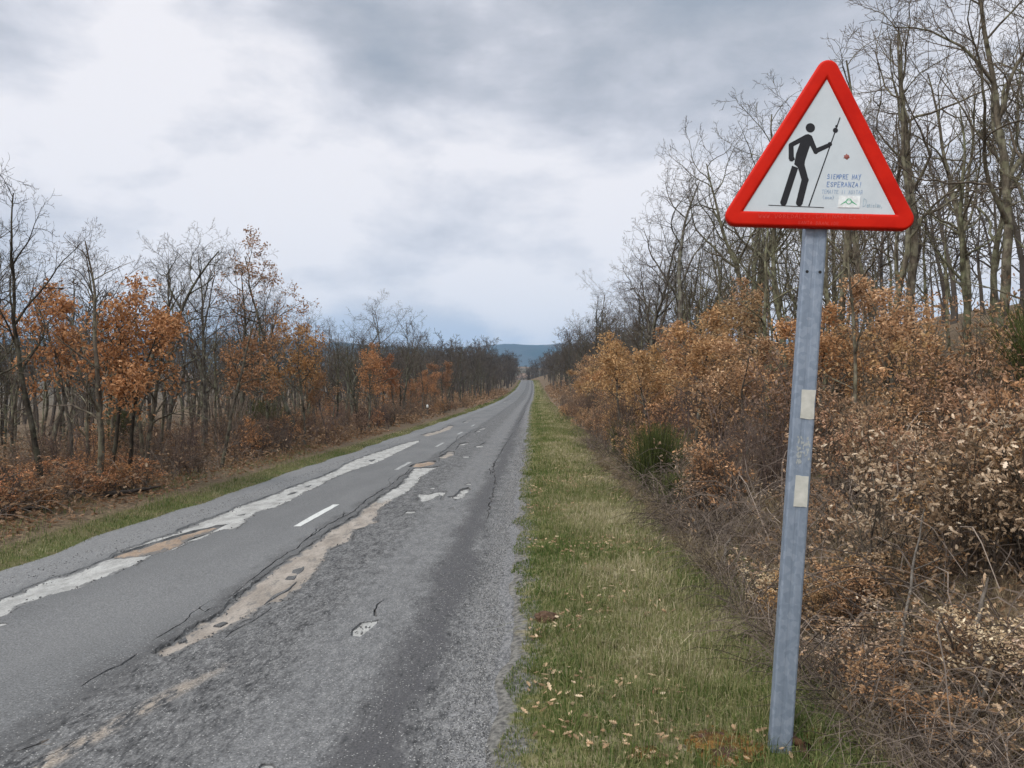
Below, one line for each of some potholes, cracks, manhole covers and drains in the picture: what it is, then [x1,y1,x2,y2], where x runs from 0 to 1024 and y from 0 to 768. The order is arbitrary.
pothole [415,491,448,502]
pothole [448,487,471,501]
crack [486,410,526,522]
pothole [0,440,420,618]
pothole [150,466,439,659]
crack [82,465,413,686]
